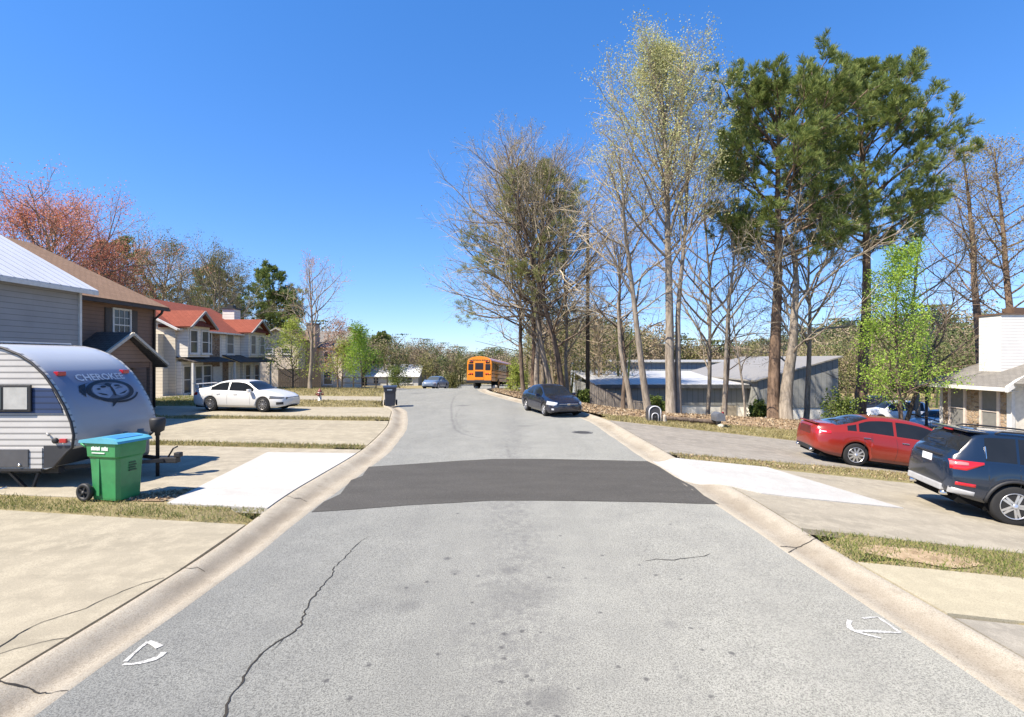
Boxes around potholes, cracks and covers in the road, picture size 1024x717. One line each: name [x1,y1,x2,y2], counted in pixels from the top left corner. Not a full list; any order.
crack [223,537,367,717]
crack [0,578,161,653]
